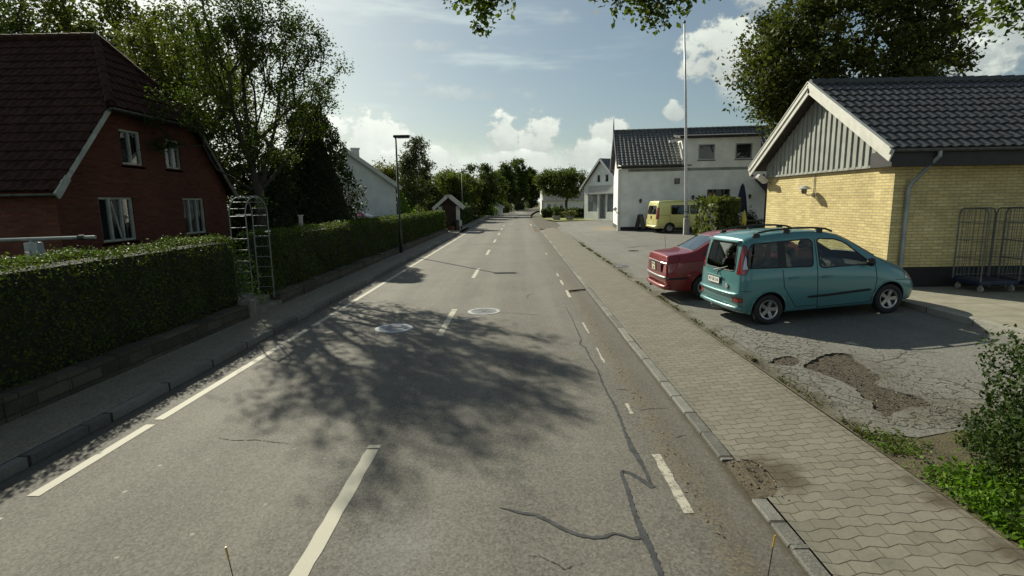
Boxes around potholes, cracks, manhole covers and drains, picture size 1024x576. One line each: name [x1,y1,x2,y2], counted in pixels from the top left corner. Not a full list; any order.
pothole [803,353,933,416]
manhole cover [375,324,413,333]
pothole [768,356,800,366]
pothole [722,459,778,500]
crack [710,325,997,430]
